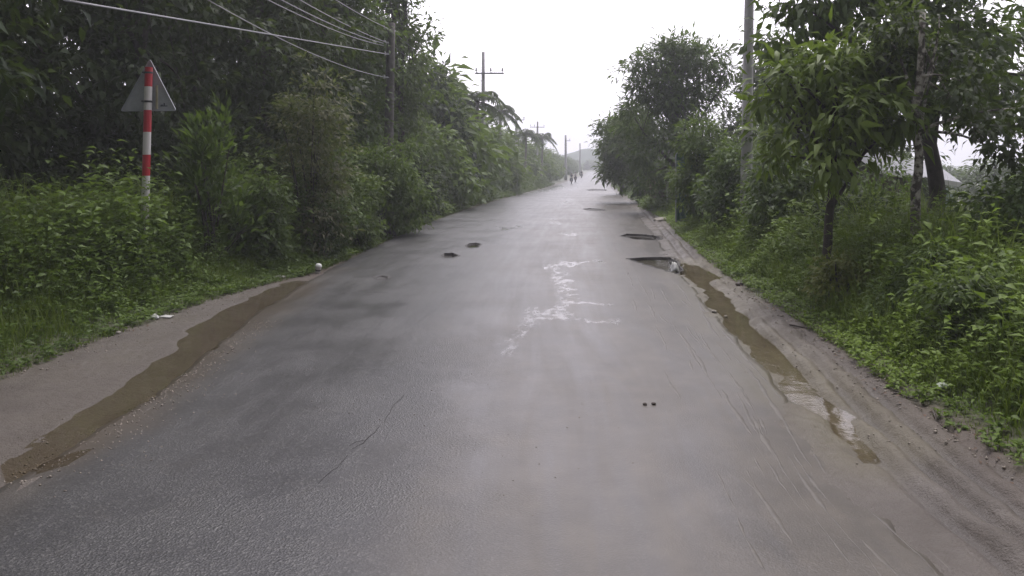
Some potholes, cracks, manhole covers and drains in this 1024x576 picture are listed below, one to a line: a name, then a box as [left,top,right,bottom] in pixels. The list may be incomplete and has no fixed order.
crack [319,395,404,483]
pothole [626,257,684,274]
